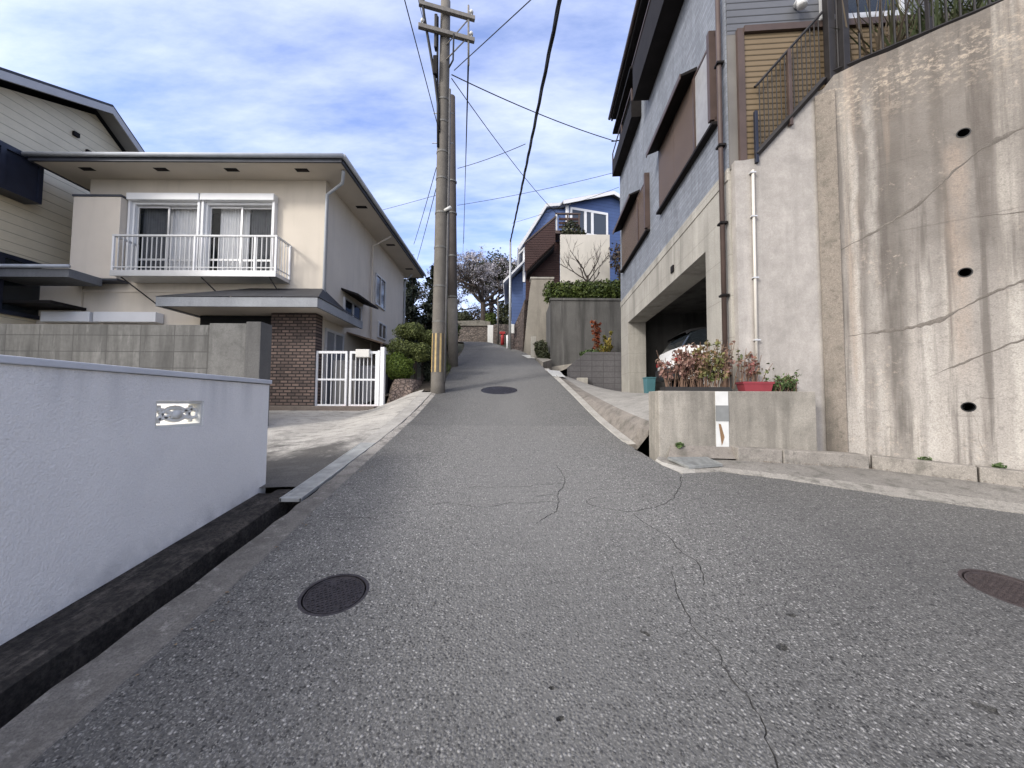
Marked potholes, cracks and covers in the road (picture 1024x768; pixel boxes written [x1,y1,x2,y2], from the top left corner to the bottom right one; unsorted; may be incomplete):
crack [586,475,779,768]
manhole cover [297,573,370,616]
manhole cover [481,386,517,394]
crack [418,465,566,523]
manhole cover [958,569,1024,608]
